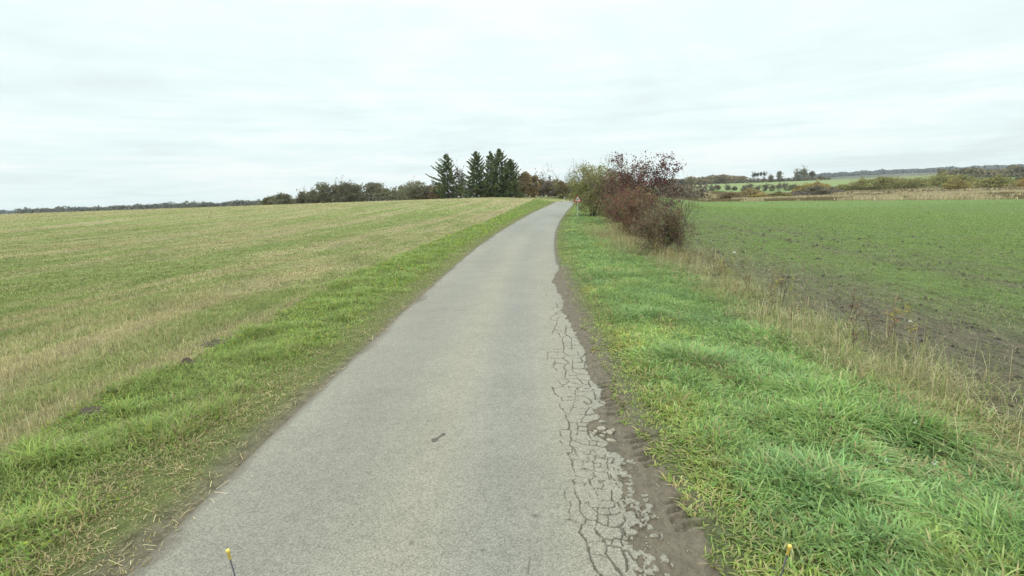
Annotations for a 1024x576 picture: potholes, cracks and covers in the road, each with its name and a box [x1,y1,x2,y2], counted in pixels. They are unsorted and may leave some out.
crack [544,304,635,576]
